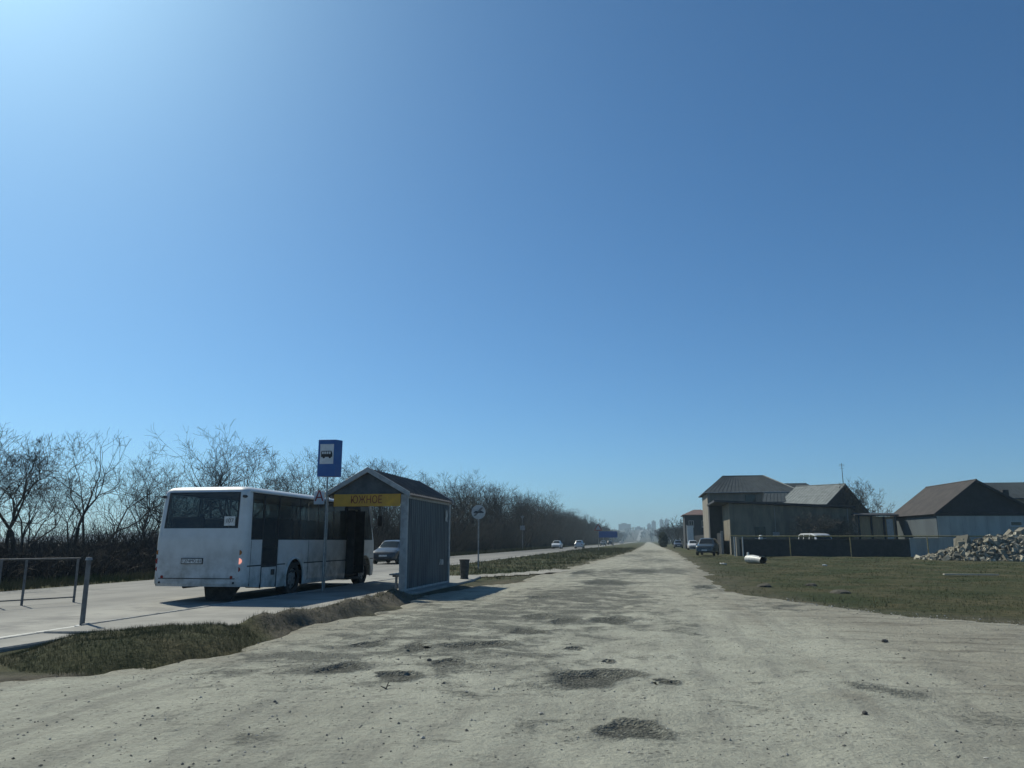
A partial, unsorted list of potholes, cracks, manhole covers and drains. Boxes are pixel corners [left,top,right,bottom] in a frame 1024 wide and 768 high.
pothole [367,670,430,685]
pothole [534,667,663,693]
pothole [422,639,526,652]
pothole [340,639,389,649]
pothole [580,715,682,743]
pothole [299,661,376,676]
pothole [648,678,685,686]
pothole [399,642,436,655]
pothole [425,657,469,668]
